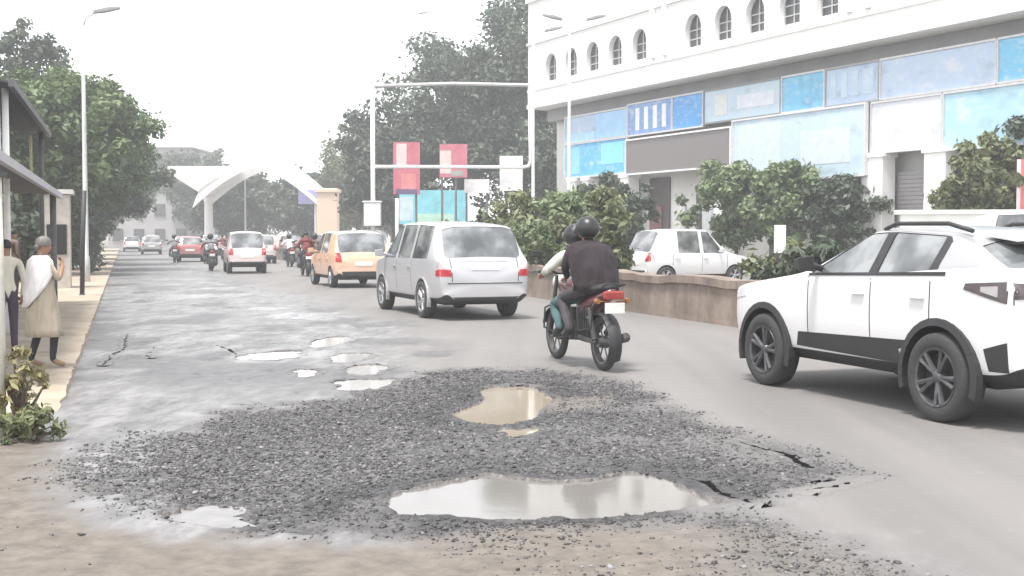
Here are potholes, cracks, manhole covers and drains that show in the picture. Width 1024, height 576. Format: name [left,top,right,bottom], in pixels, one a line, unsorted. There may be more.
pothole [303,335,361,348]
crack [96,333,273,367]
crack [679,438,874,509]
pothole [322,377,407,392]
pothole [440,383,562,427]
pothole [140,502,268,532]
pothole [334,363,402,376]
pothole [483,426,554,440]
pothole [285,368,328,379]
pothole [228,349,308,361]
pothole [370,468,739,524]
pothole [321,352,379,364]
